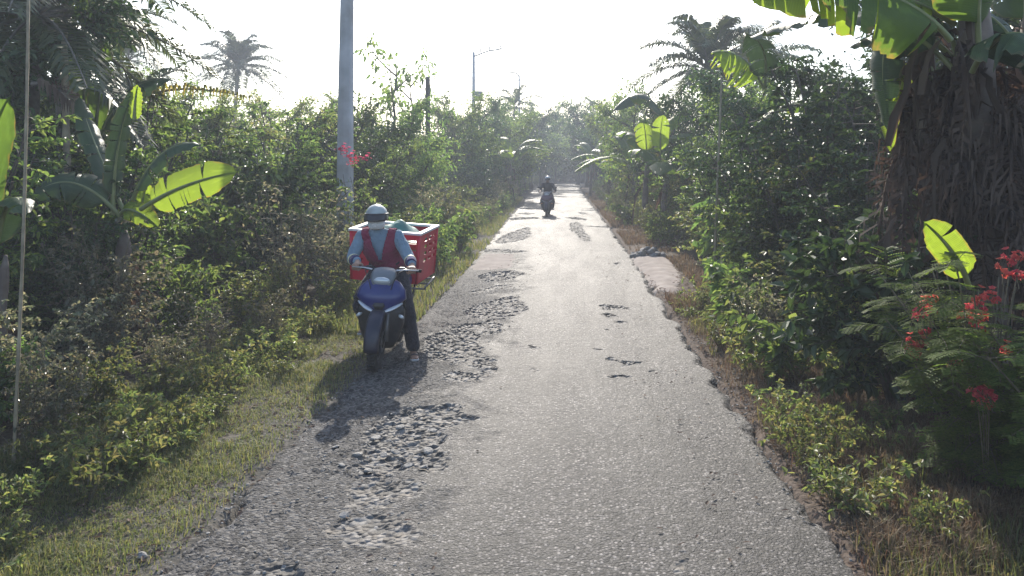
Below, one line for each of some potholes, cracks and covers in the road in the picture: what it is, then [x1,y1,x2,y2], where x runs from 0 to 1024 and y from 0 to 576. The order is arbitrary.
pothole [440,369,490,383]
pothole [462,296,529,320]
pothole [339,403,481,482]
pothole [323,513,428,548]
pothole [567,222,592,242]
pothole [419,330,485,365]
pothole [339,479,427,511]
pothole [476,270,528,283]
pothole [468,356,500,374]
pothole [495,227,532,244]
pothole [447,318,507,336]
